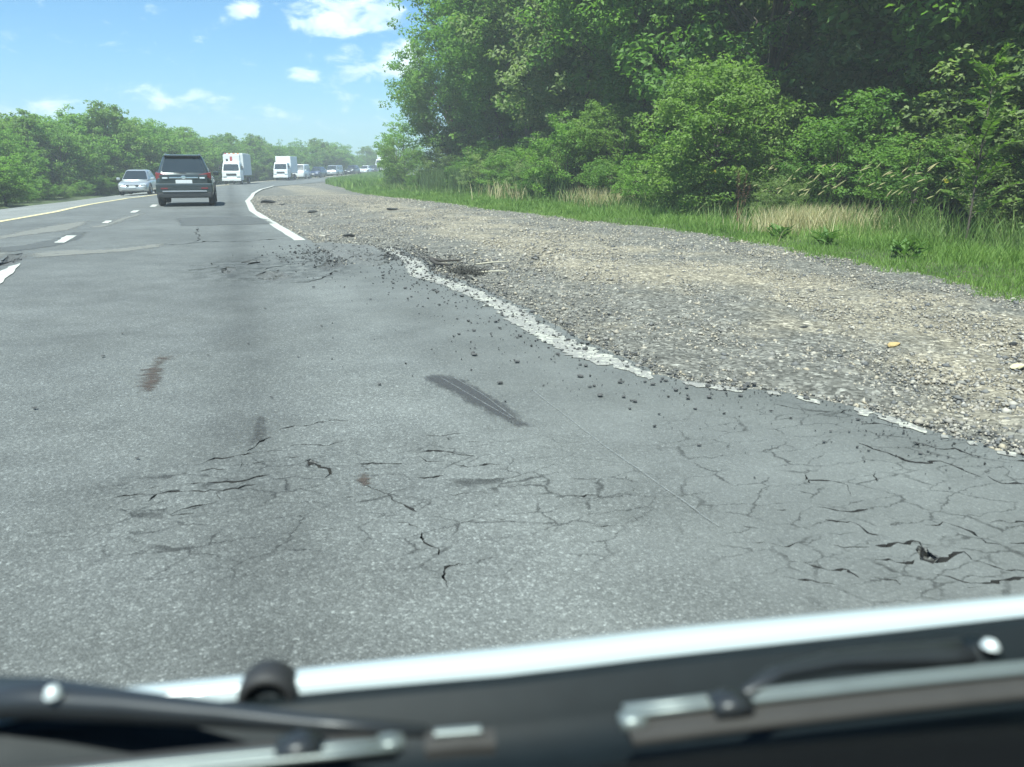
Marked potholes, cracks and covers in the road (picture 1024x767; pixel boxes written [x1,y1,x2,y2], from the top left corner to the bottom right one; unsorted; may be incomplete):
crack [244,262,338,283]
crack [348,433,501,587]
crack [115,419,348,516]
crack [859,443,1024,484]
crack [745,474,1024,588]
